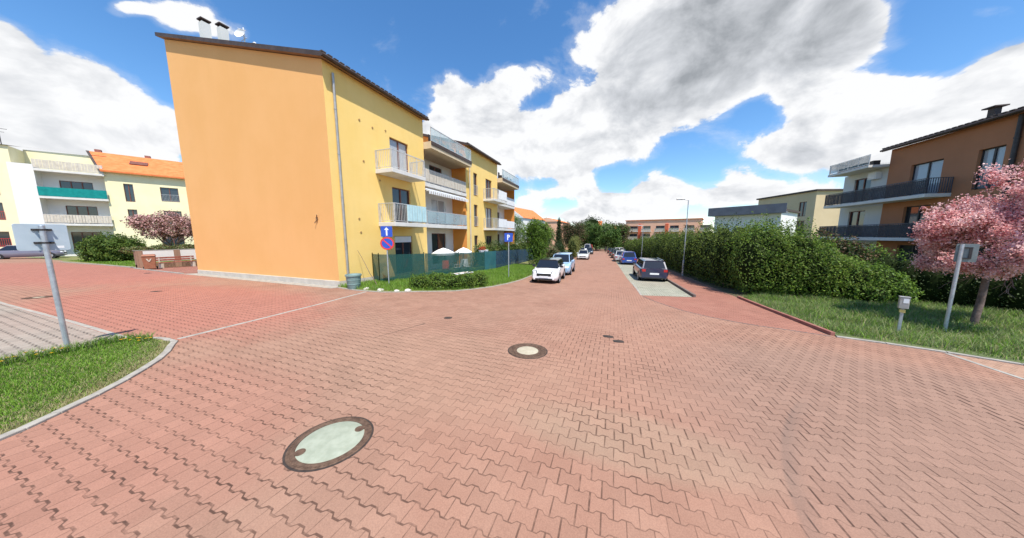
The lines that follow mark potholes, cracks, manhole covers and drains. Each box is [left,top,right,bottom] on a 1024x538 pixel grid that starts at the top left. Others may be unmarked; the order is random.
manhole cover [282,416,374,472]
manhole cover [508,343,548,359]
